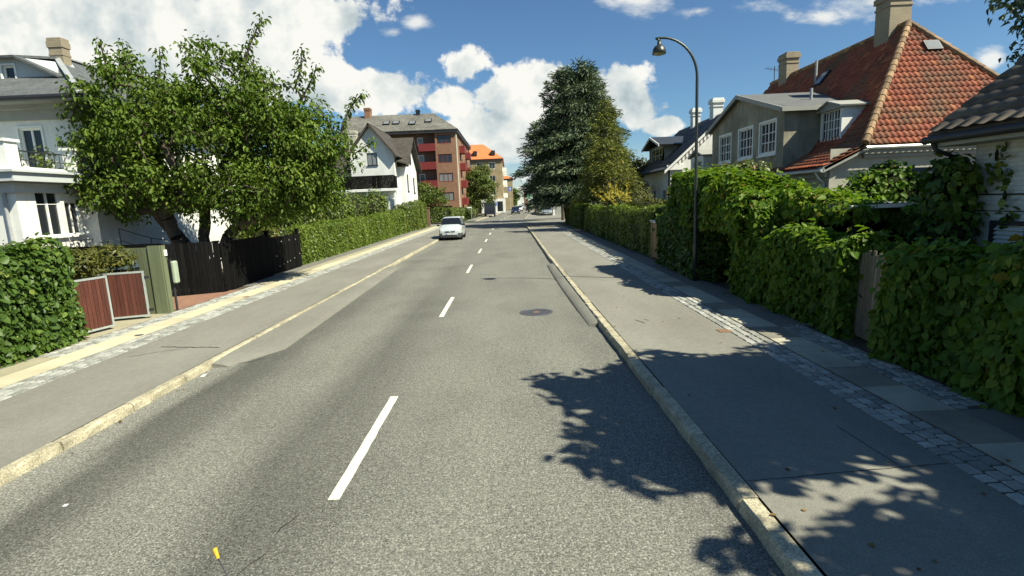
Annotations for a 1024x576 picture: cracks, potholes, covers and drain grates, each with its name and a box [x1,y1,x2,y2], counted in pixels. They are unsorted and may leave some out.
crack [239,511,302,574]
